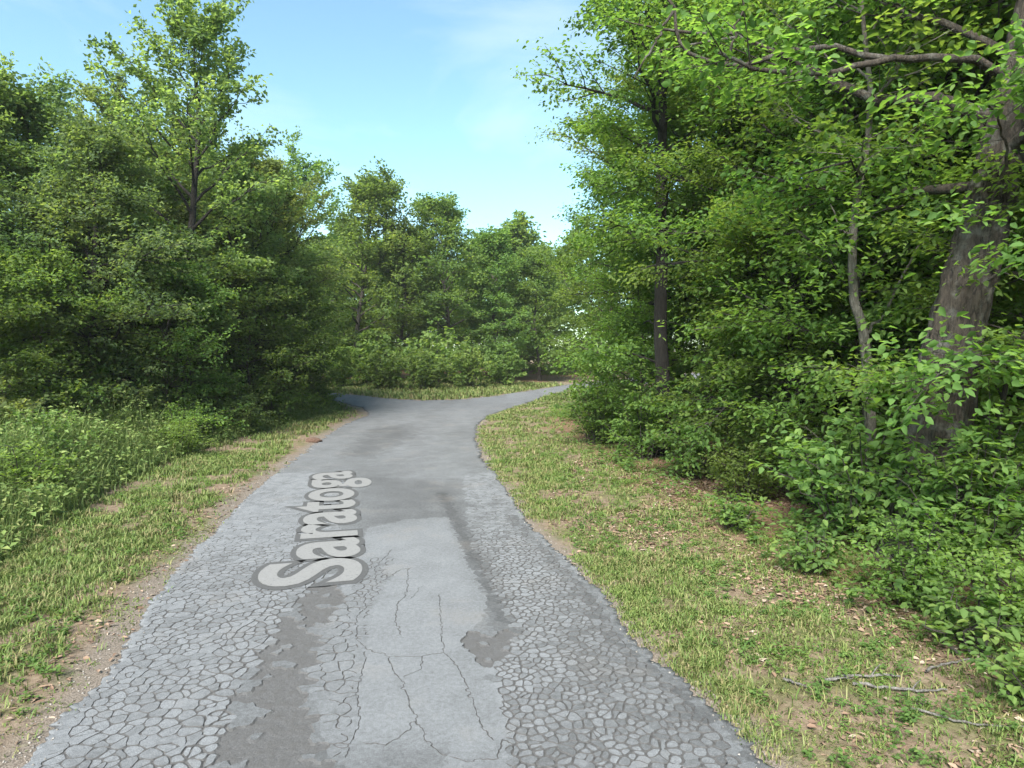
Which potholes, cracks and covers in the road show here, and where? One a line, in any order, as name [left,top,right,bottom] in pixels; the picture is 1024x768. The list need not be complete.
crack [308,488,742,768]
pothole [460,629,518,668]
crack [39,486,340,768]
